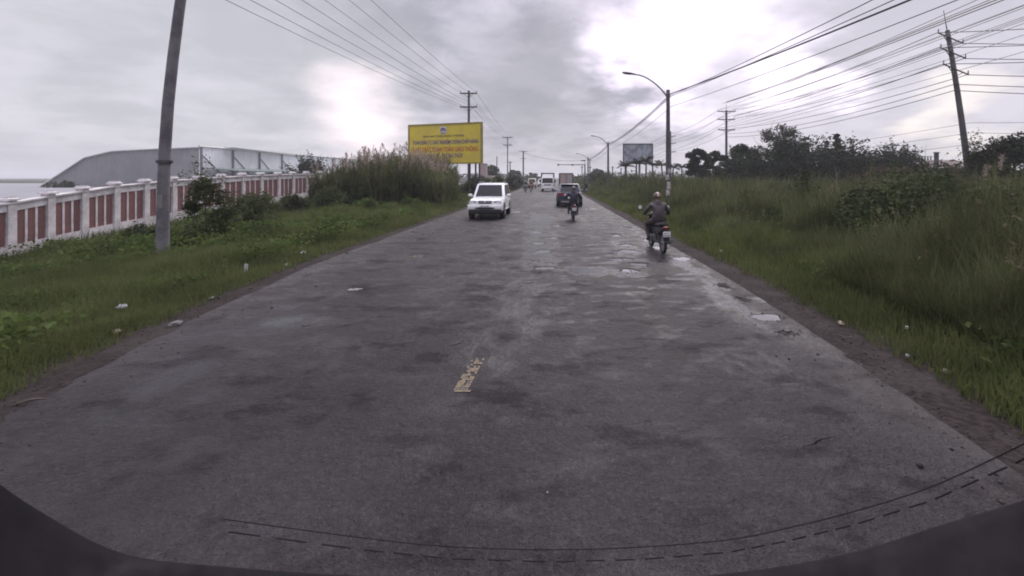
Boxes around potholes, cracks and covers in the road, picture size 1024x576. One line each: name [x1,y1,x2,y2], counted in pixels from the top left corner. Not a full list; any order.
pothole [748,312,785,322]
